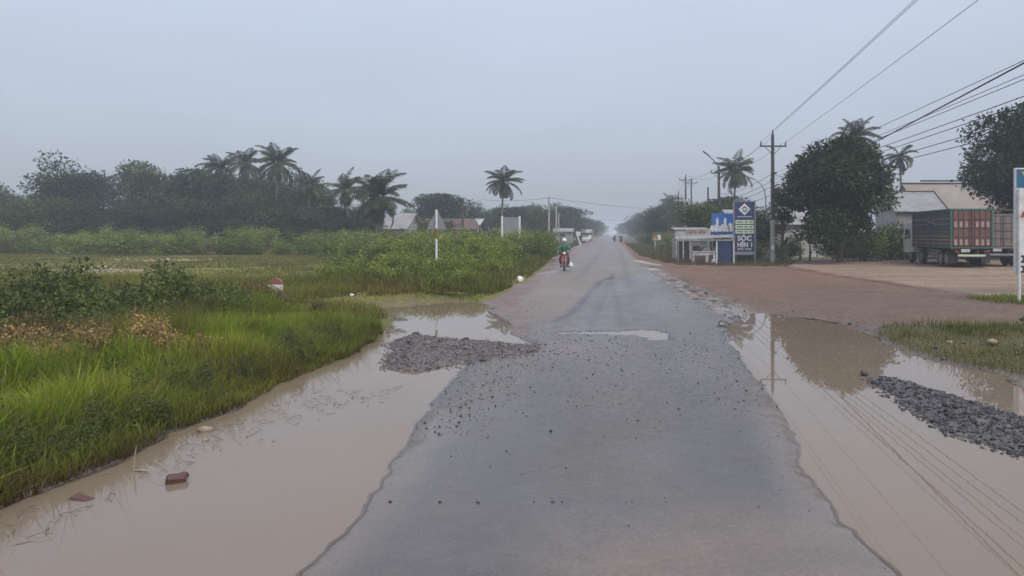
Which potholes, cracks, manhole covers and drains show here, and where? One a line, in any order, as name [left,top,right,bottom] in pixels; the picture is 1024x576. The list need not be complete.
pothole [545,328,673,341]
